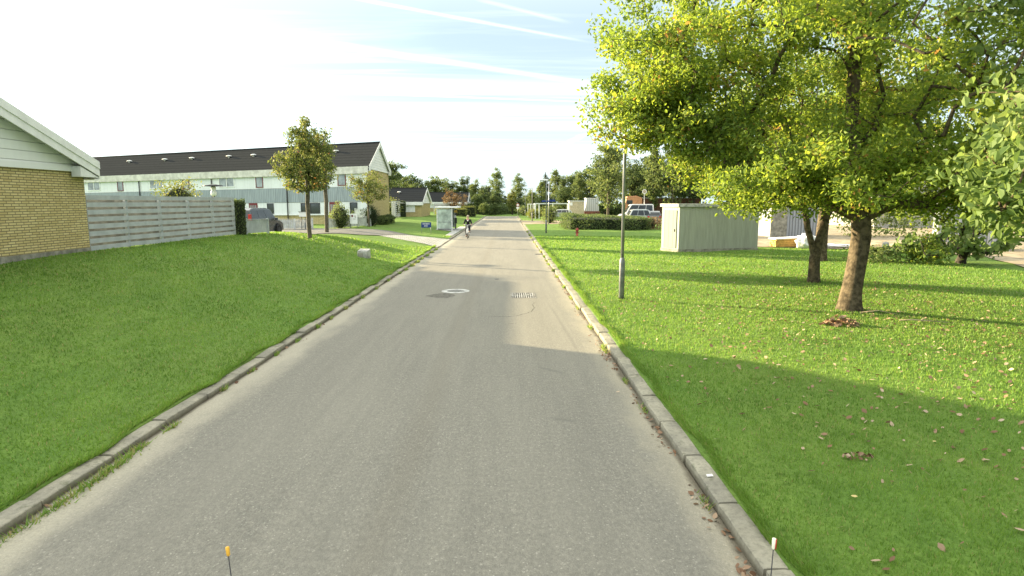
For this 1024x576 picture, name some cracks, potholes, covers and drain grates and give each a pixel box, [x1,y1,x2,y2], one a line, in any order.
drain grate [510,293,536,303]
